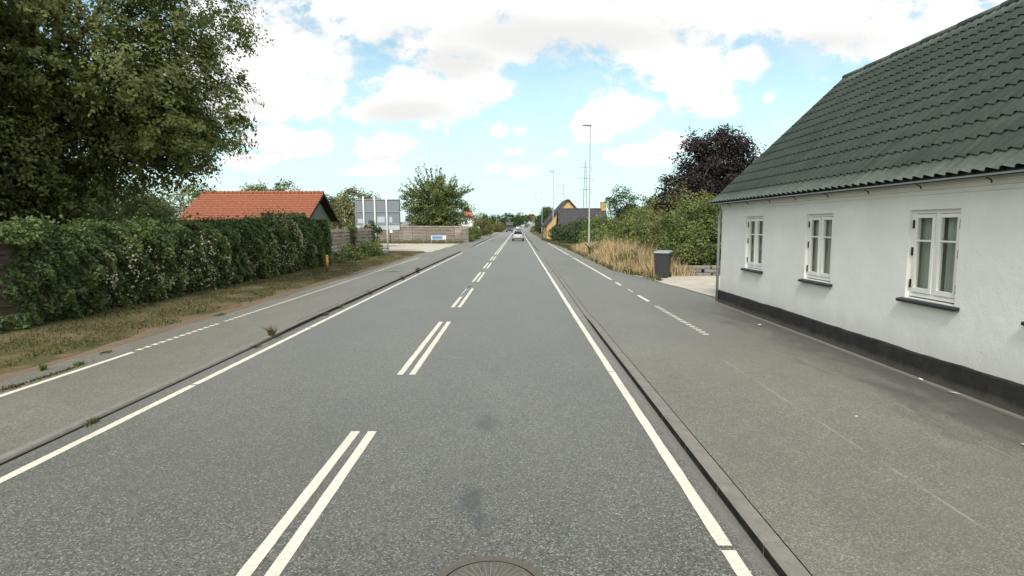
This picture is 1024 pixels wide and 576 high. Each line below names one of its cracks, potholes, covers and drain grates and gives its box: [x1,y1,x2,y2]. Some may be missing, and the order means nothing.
manhole cover [436,556,544,576]
